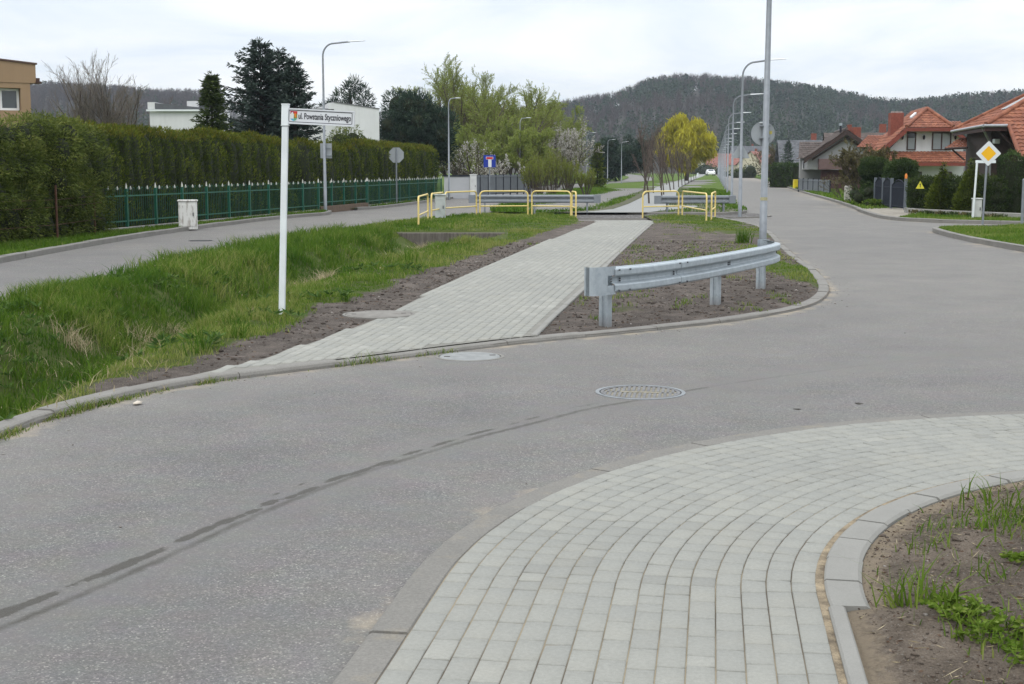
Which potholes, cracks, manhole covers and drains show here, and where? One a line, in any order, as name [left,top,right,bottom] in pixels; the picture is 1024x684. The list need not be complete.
manhole cover [595,385,686,400]
manhole cover [435,352,504,361]
manhole cover [342,310,415,320]
